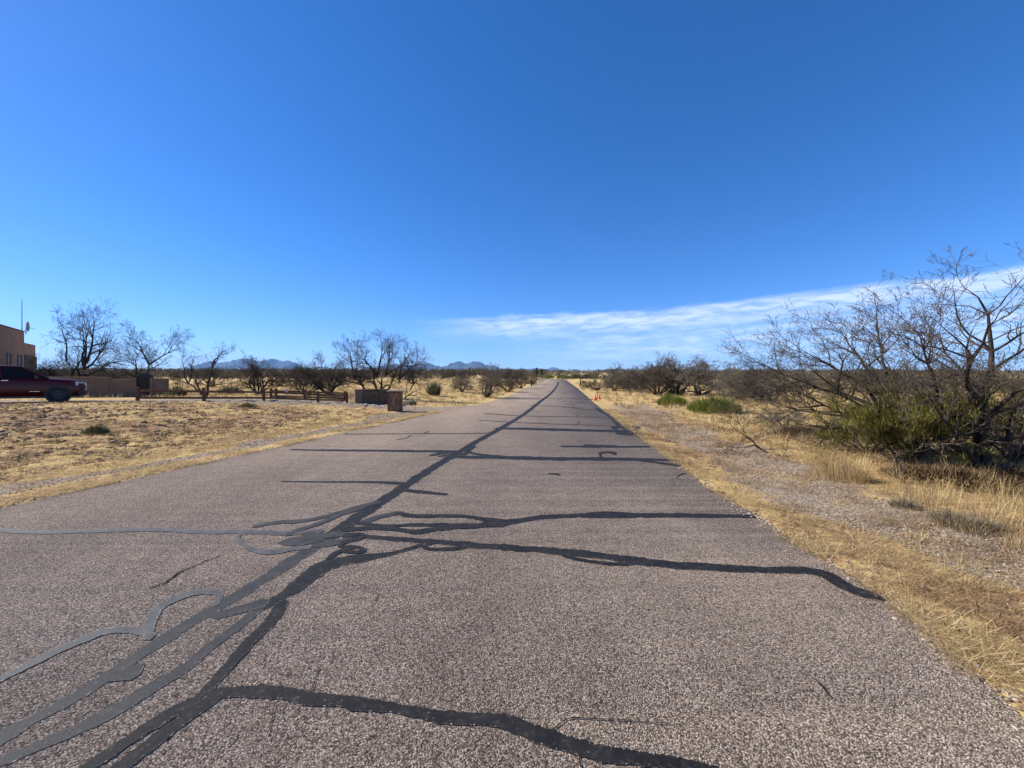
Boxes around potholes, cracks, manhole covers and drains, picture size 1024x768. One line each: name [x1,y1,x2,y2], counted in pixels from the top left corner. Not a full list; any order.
crack [553,717,677,730]
